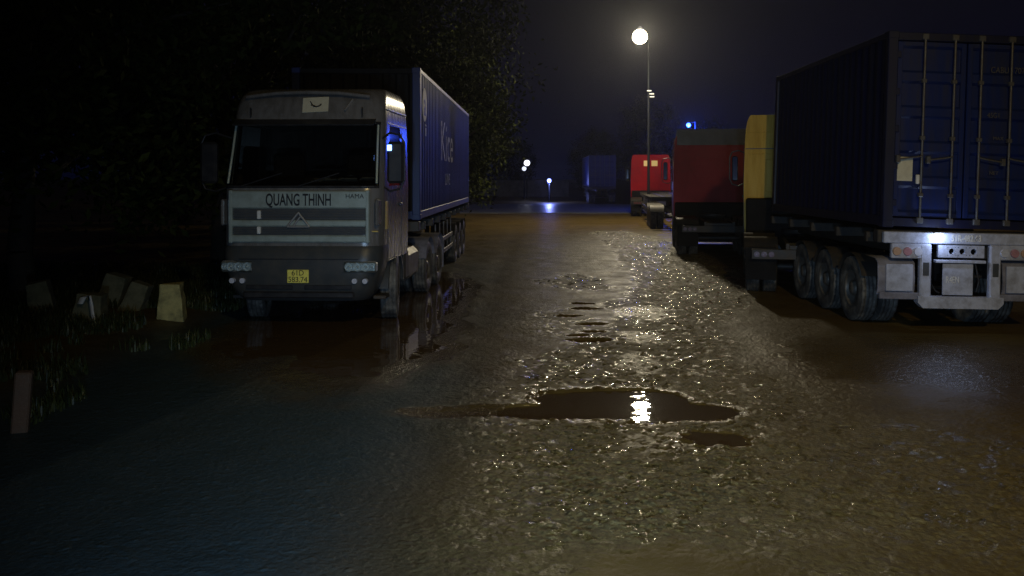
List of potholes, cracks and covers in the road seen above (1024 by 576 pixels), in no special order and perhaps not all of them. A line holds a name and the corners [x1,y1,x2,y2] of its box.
pothole [497,387,742,424]
pothole [678,429,755,447]
